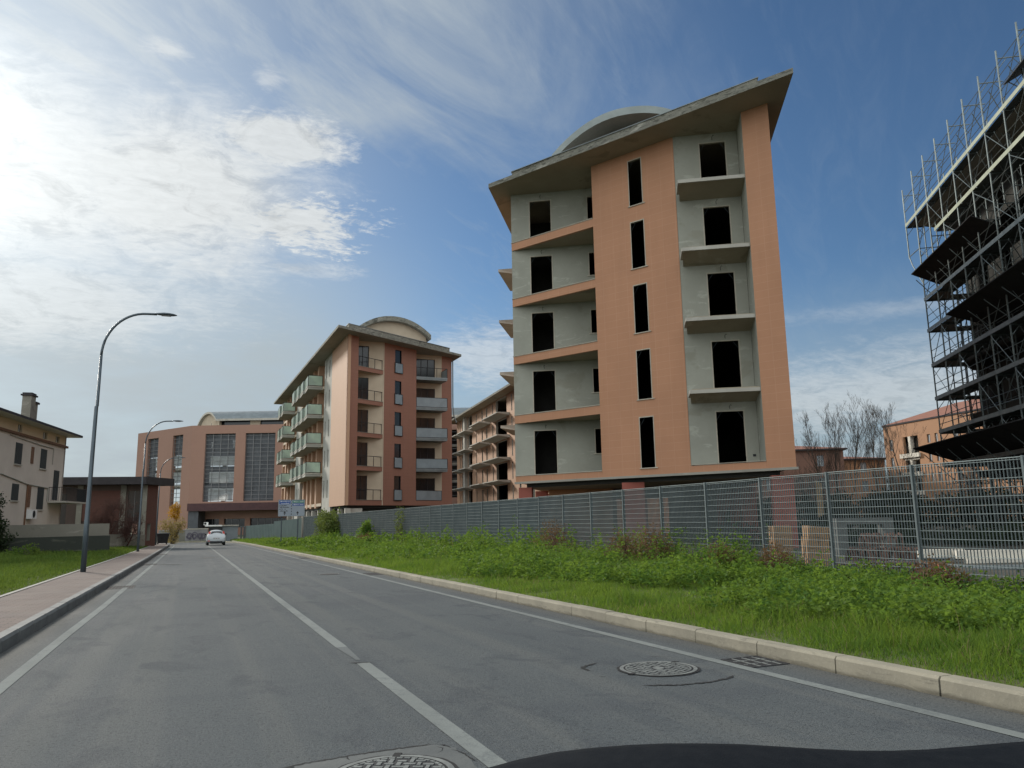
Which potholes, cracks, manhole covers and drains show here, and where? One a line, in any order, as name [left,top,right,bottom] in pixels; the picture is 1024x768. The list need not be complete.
drain grate [721,655,790,668]
manhole cover [339,753,458,768]
manhole cover [617,661,701,677]
